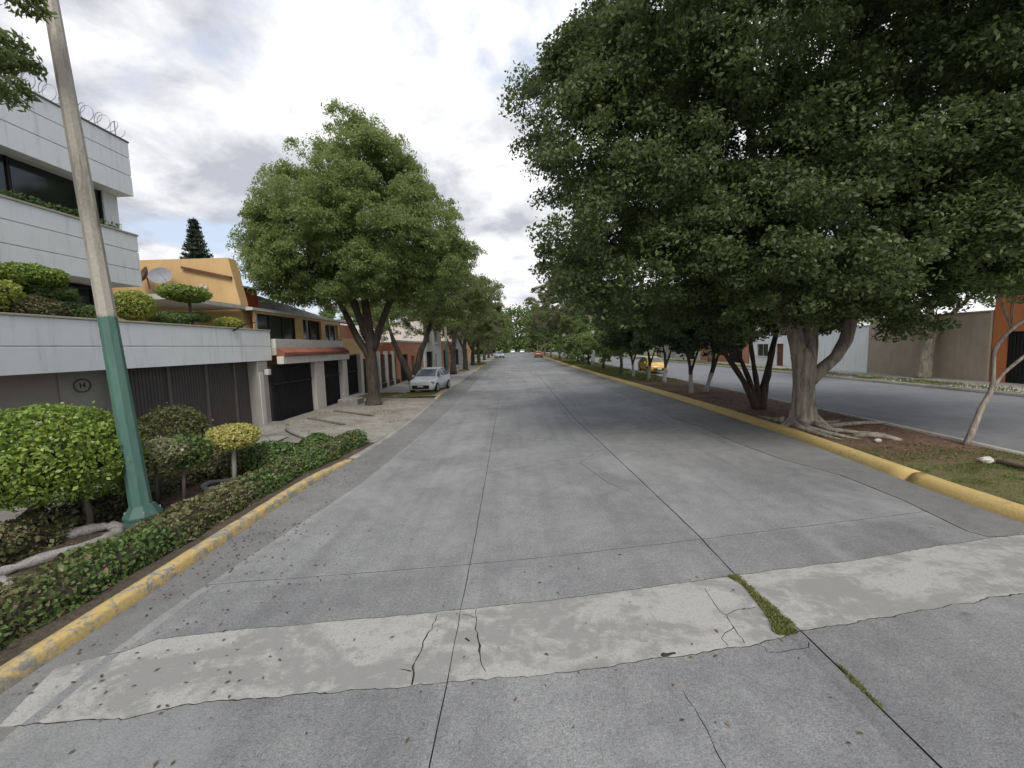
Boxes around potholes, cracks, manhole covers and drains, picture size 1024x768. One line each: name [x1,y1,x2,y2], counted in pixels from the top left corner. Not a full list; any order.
crack [402,614,438,685]
crack [683,691,726,768]
crack [705,589,810,653]
crack [462,609,486,672]
